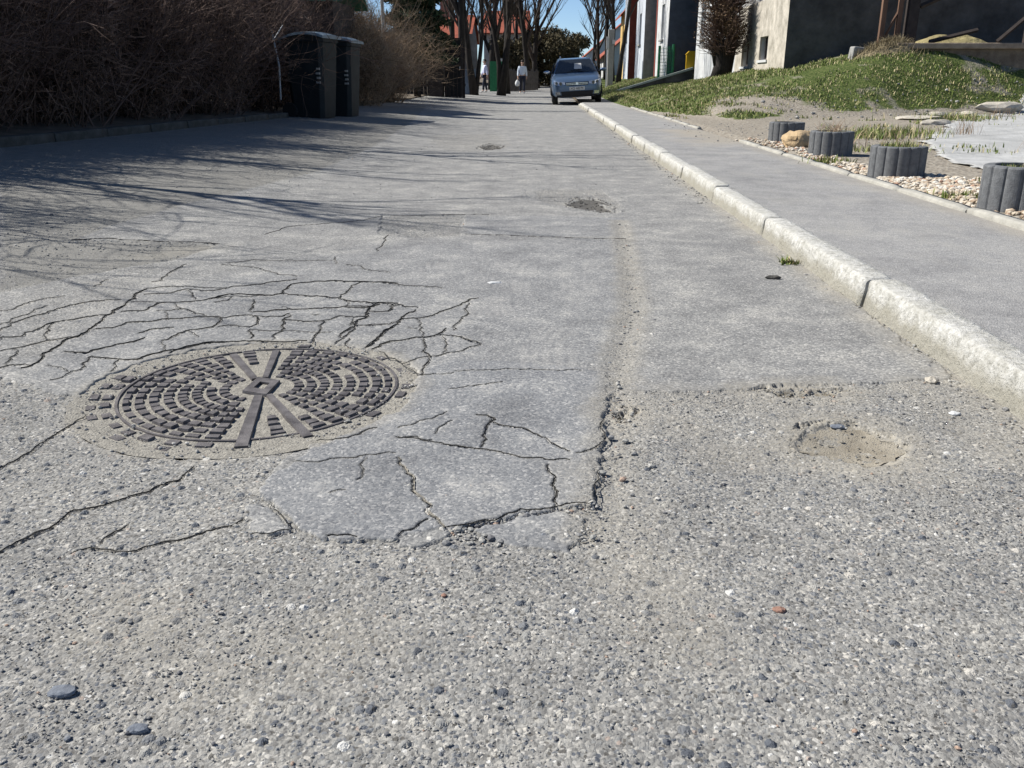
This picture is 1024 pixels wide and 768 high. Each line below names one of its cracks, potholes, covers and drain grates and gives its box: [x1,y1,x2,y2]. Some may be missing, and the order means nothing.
manhole cover [65,342,419,459]
pothole [565,197,616,213]
crack [0,259,482,380]
crack [0,368,607,553]
pothole [787,419,909,470]
